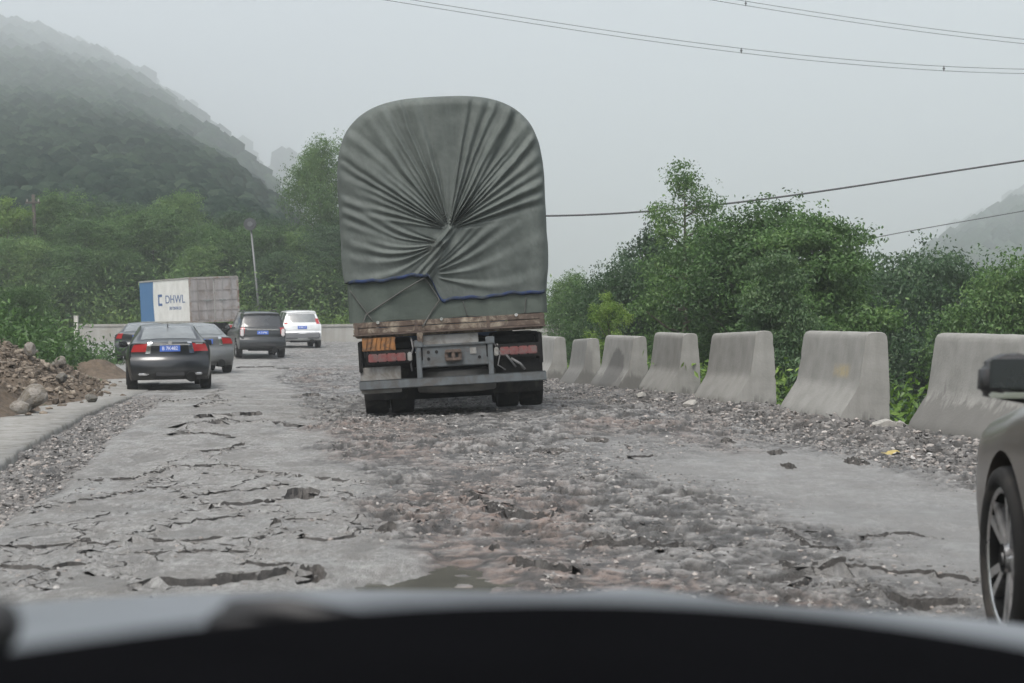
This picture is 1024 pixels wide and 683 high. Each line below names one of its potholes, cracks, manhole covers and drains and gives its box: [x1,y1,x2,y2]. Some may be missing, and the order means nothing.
crack [696,524,976,615]
pothole [284,564,335,587]
pothole [478,543,507,553]
pothole [275,487,328,503]
pothole [366,521,407,536]
crack [0,388,381,596]
pothole [525,446,581,456]
pothole [837,456,877,467]
pothole [774,462,801,471]
